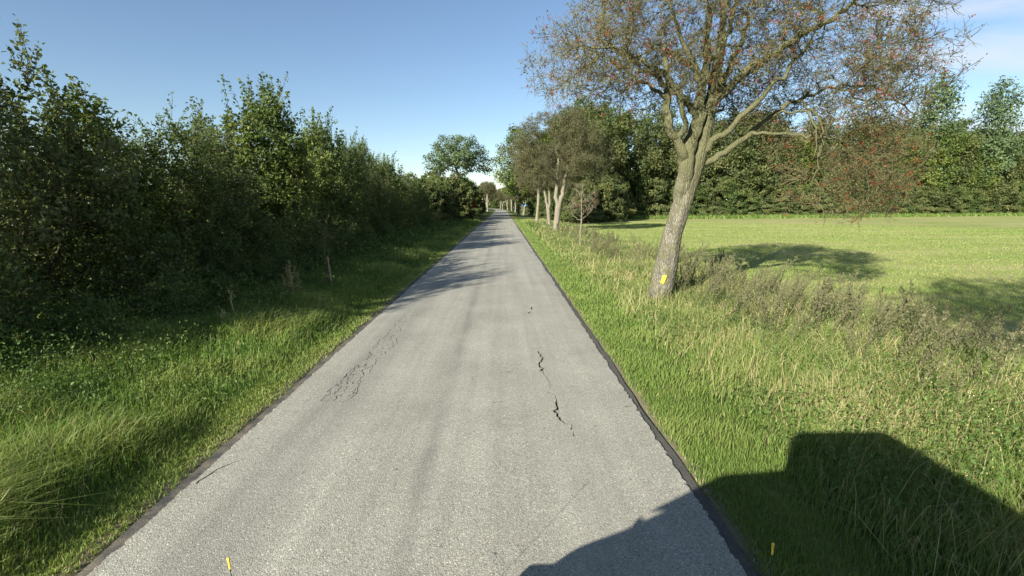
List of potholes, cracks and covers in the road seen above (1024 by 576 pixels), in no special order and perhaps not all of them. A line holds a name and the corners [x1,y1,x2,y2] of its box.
crack [321,311,416,402]
crack [532,348,574,436]
